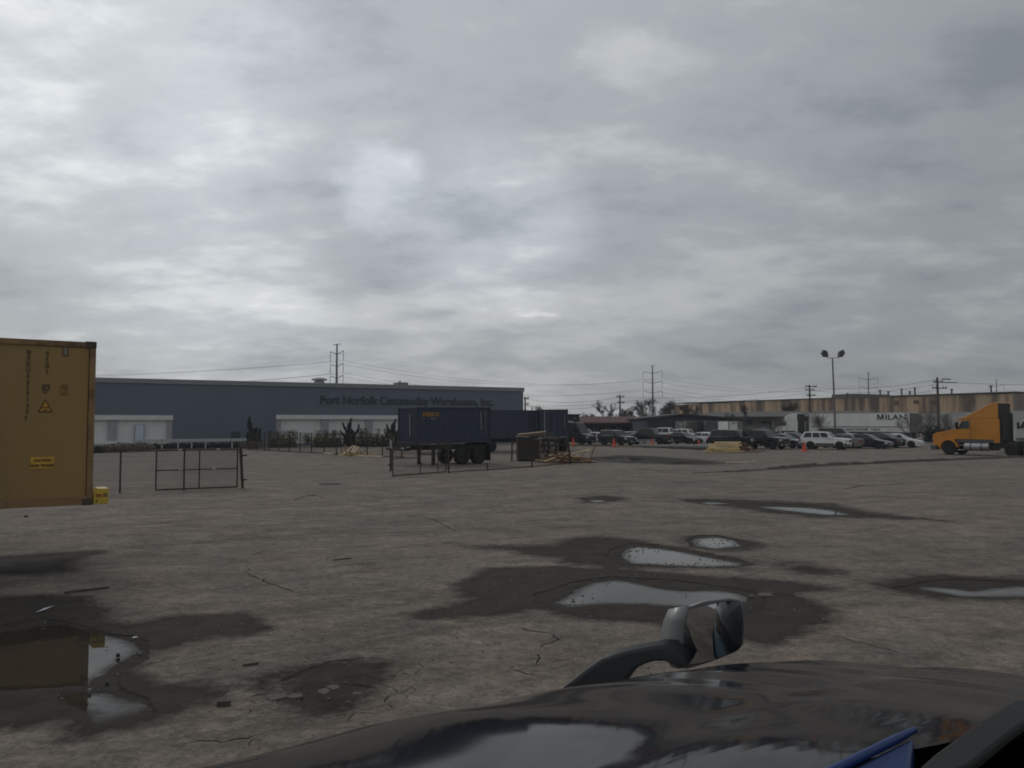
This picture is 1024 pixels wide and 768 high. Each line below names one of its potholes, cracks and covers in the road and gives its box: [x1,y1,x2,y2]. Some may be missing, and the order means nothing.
pothole [604,543,755,568]
pothole [532,576,768,627]
crack [512,628,560,675]
pothole [685,535,746,549]
pothole [739,503,882,517]
crack [222,647,427,723]
pothole [886,578,1024,600]
pothole [0,617,158,725]
crack [242,550,301,594]
